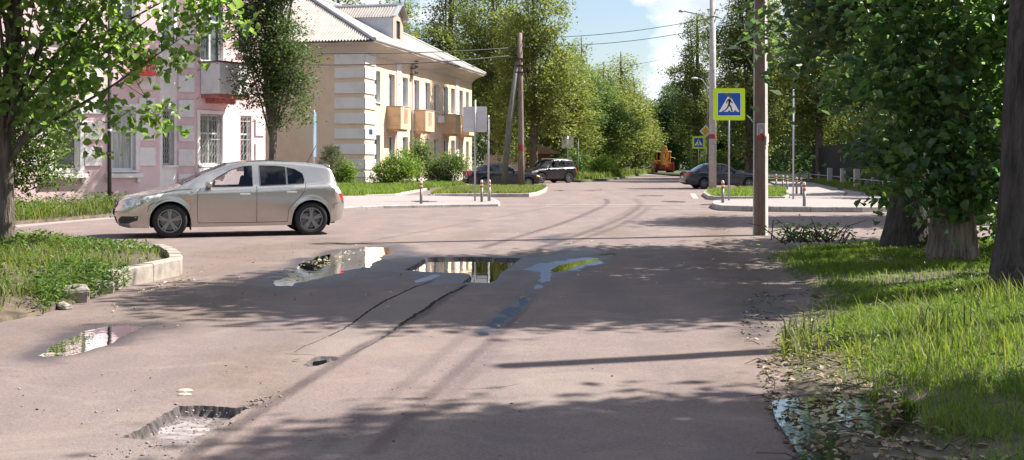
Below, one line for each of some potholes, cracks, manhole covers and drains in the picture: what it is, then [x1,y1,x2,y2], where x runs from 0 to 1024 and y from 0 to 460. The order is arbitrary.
pothole [121,405,247,440]
pothole [303,356,340,367]
pothole [405,257,521,284]
crack [285,277,467,356]
